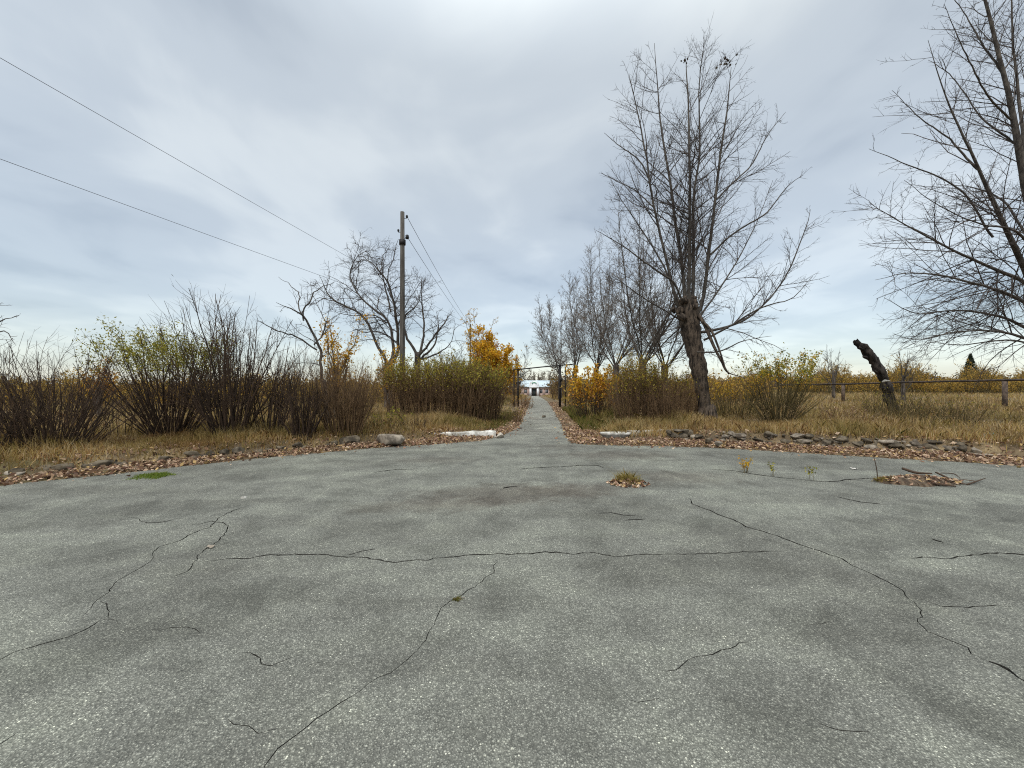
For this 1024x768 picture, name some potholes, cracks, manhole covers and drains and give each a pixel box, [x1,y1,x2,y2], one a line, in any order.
crack [0,499,1024,767]
